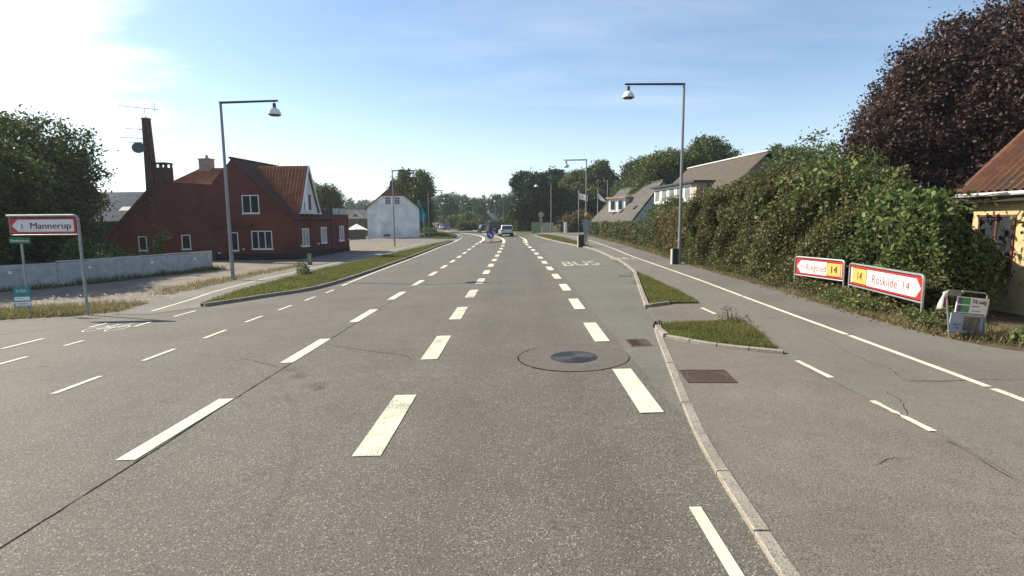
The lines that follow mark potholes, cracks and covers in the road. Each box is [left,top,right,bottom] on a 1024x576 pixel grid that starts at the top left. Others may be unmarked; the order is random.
manhole cover [551,351,597,363]
manhole cover [679,370,738,383]
